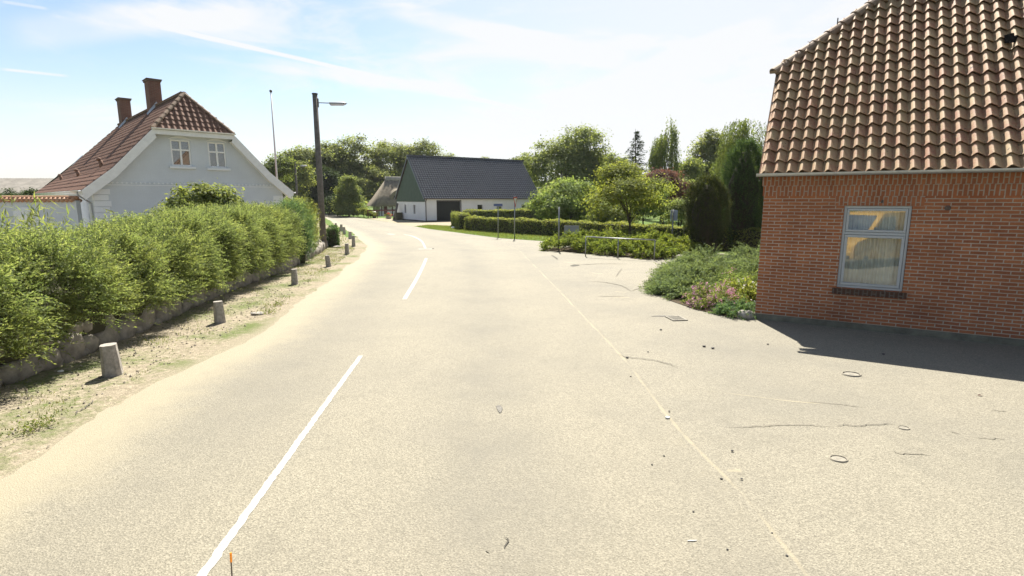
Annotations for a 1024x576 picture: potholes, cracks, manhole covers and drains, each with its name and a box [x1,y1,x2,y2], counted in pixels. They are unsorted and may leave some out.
manhole cover [829,455,849,463]
